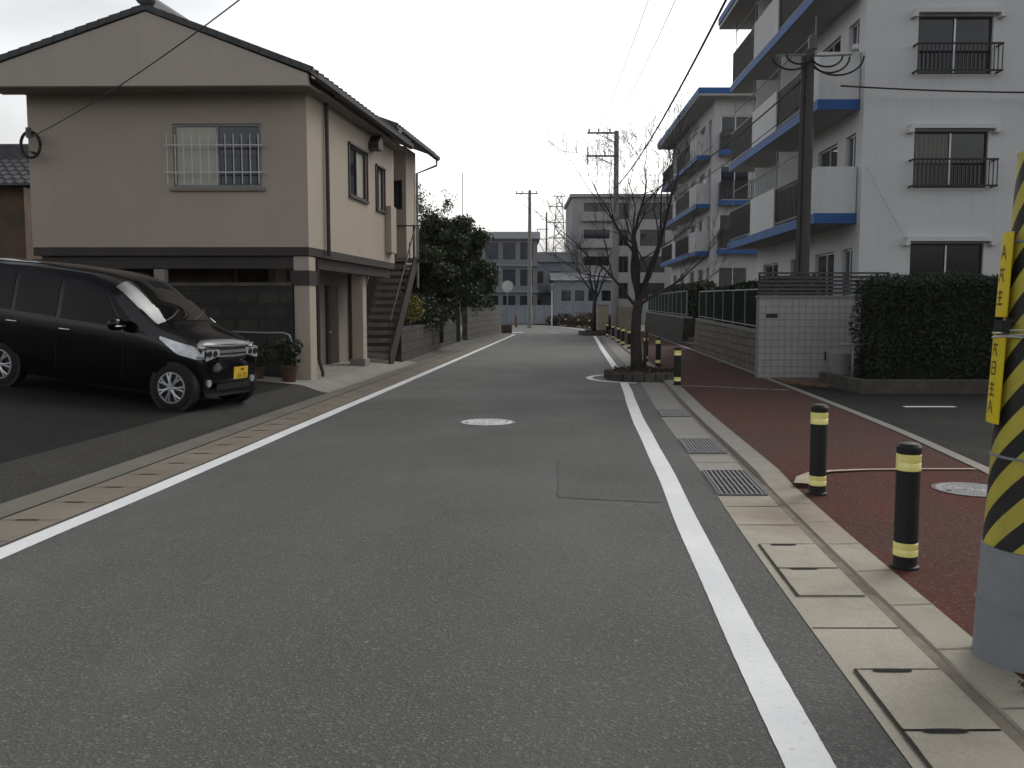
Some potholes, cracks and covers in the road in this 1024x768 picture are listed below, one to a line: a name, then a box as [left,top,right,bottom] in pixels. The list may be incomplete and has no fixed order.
drain grate [657,409,691,417]
manhole cover [459,418,515,426]
manhole cover [931,482,988,497]
drain grate [678,438,727,454]
drain grate [702,470,768,496]
